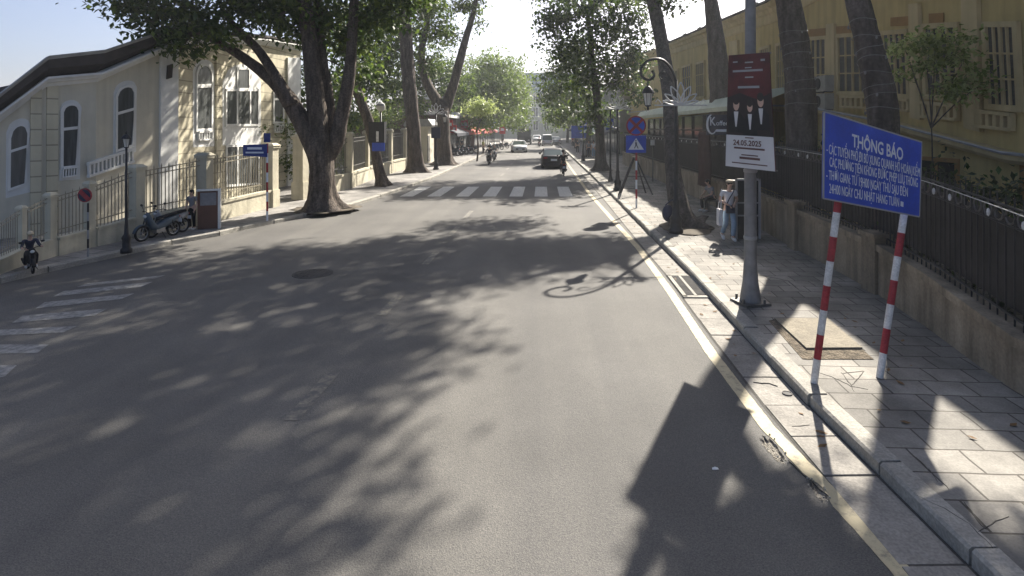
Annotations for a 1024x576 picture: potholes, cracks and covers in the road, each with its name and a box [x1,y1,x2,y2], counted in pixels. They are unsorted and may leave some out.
manhole cover [292,268,333,279]
pothole [806,477,831,502]
pothole [759,433,789,464]
drain grate [667,275,710,298]
